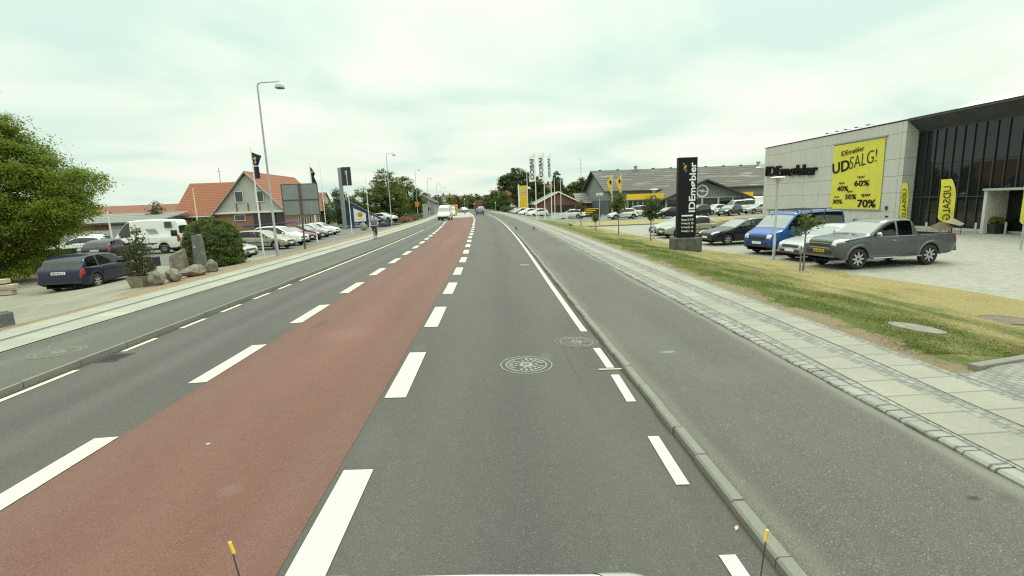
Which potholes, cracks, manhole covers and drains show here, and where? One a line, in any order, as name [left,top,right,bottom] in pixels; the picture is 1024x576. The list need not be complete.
manhole cover [26,345,88,359]
manhole cover [888,321,947,335]
manhole cover [976,315,1024,326]
manhole cover [500,356,553,374]
drain grate [93,352,135,363]
manhole cover [555,336,598,348]
